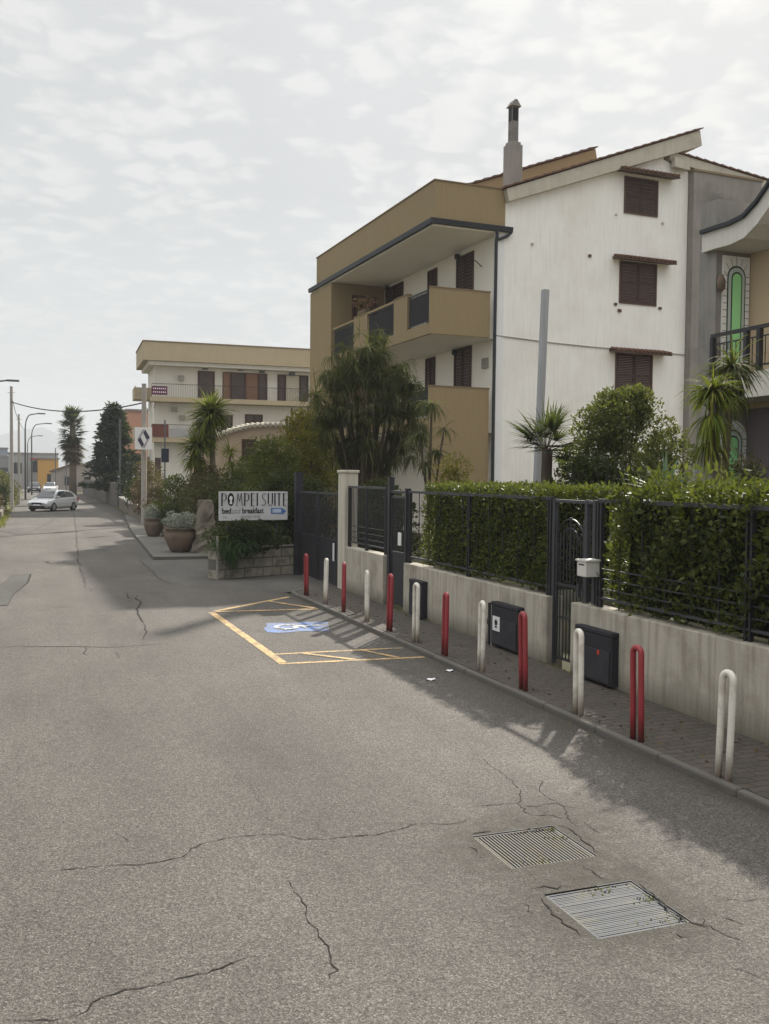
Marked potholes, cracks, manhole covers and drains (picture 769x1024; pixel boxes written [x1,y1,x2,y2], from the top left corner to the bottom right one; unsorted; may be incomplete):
drain grate [472,826,597,895]
crack [286,877,339,979]
crack [29,818,469,873]
drain grate [545,881,692,939]
crack [16,561,171,680]
crack [9,955,254,1021]
crack [471,755,607,879]
